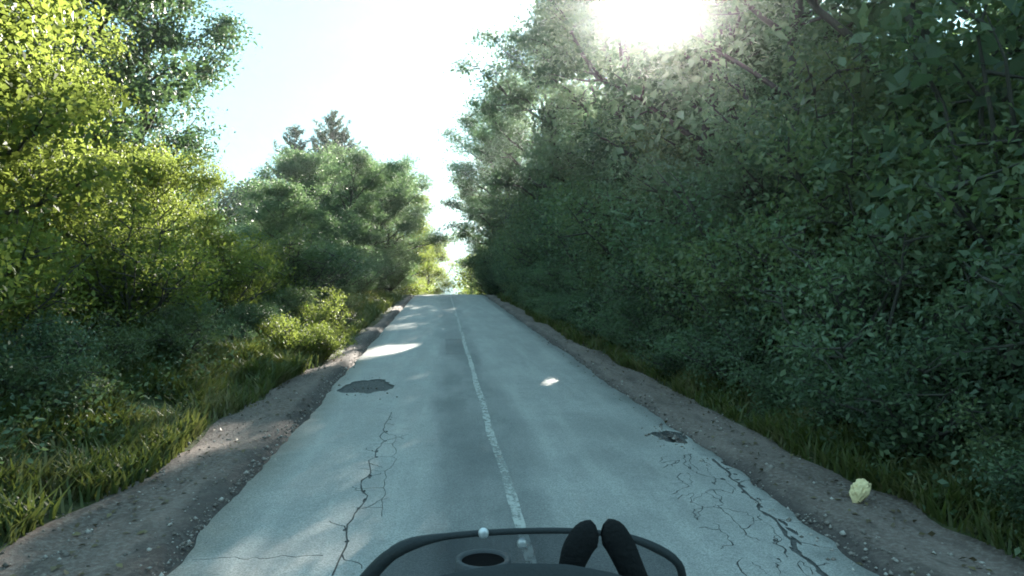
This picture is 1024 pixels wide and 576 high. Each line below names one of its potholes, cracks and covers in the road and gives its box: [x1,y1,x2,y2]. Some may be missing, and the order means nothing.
crack [661,454,837,576]
pothole [337,379,395,394]
crack [192,412,408,576]
pothole [650,431,688,443]
